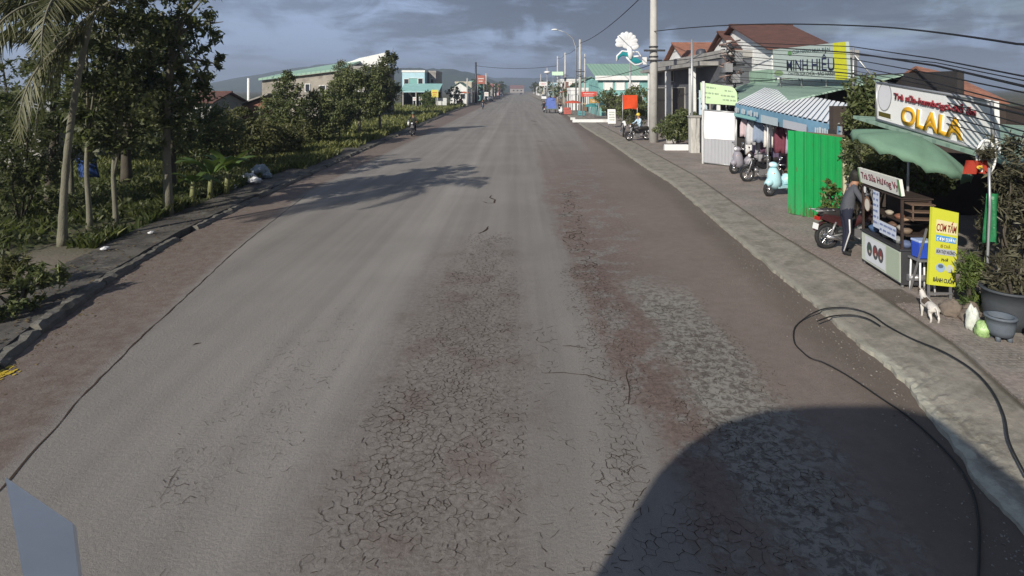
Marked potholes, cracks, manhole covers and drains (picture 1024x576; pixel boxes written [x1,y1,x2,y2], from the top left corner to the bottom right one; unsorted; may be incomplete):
crack [299,226,529,574]
crack [526,191,874,575]
